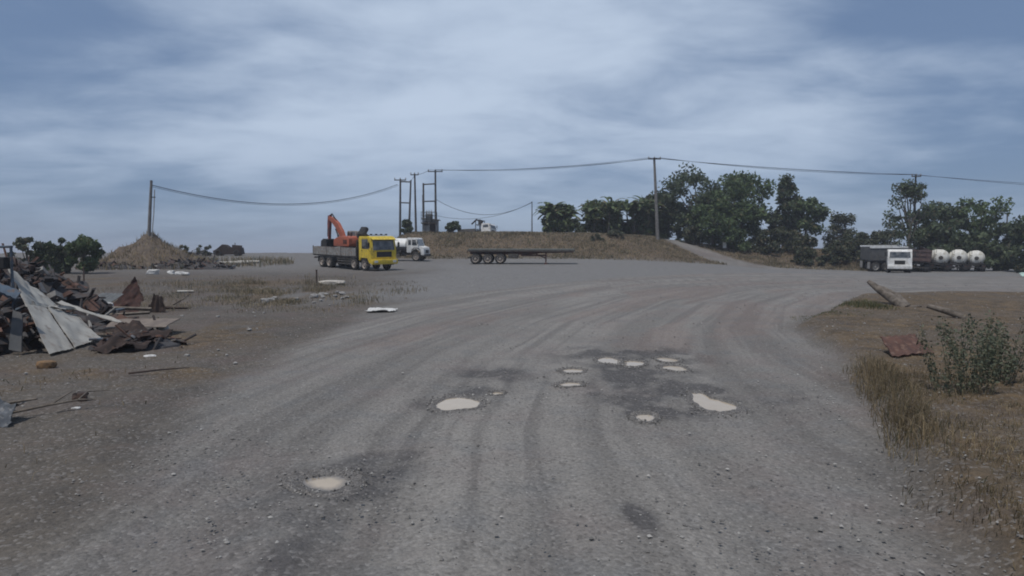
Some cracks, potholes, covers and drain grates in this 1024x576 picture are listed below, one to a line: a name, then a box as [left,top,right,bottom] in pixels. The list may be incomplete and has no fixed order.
pothole [275,466,371,501]
pothole [551,379,589,388]
pothole [592,355,627,365]
pothole [555,366,589,374]
pothole [617,359,650,368]
pothole [626,410,665,425]
pothole [651,355,685,364]
pothole [655,363,694,373]
pothole [425,393,492,413]
pothole [681,389,753,418]
